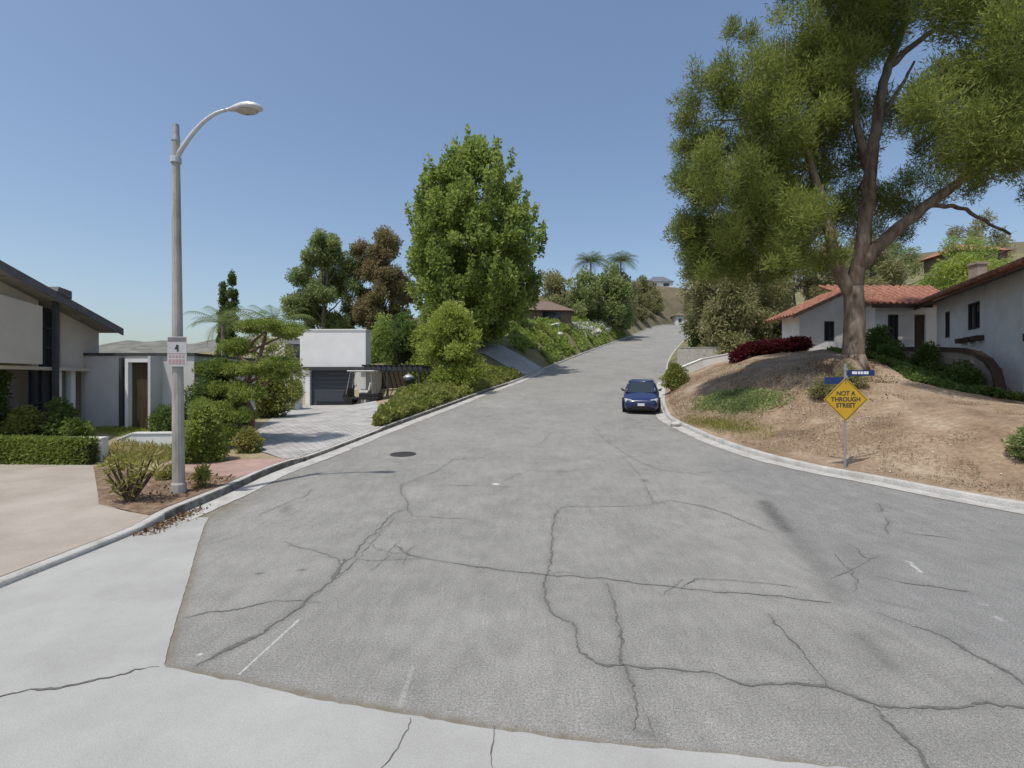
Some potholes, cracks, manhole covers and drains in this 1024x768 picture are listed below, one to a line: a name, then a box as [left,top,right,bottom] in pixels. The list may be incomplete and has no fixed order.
crack [1,666,157,696]
crack [183,458,587,666]
crack [362,428,1024,768]
